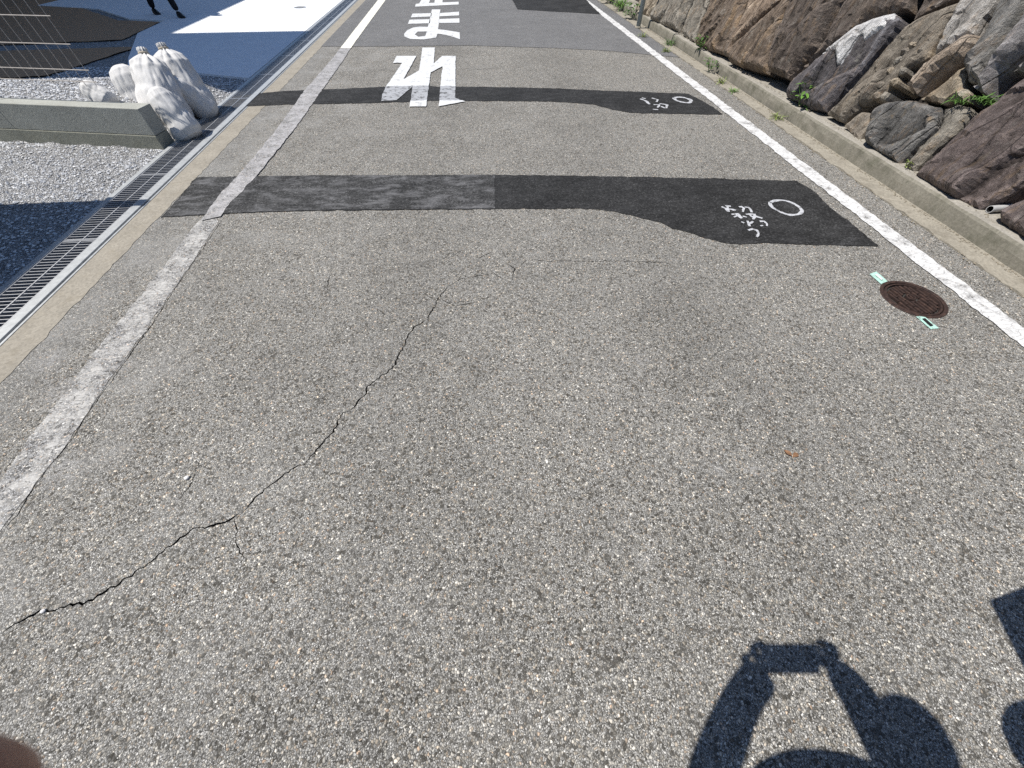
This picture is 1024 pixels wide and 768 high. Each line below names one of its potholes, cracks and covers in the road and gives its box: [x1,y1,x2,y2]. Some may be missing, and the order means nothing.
manhole cover [880,281,949,319]
drain grate [64,174,166,241]
drain grate [280,40,311,56]
drain grate [141,130,214,175]
drain grate [298,28,324,41]
drain grate [200,98,248,130]
drain grate [259,55,295,74]
drain grate [230,74,274,99]
drain grate [0,240,95,328]
crack [1,273,501,634]
drain grate [313,18,334,28]
